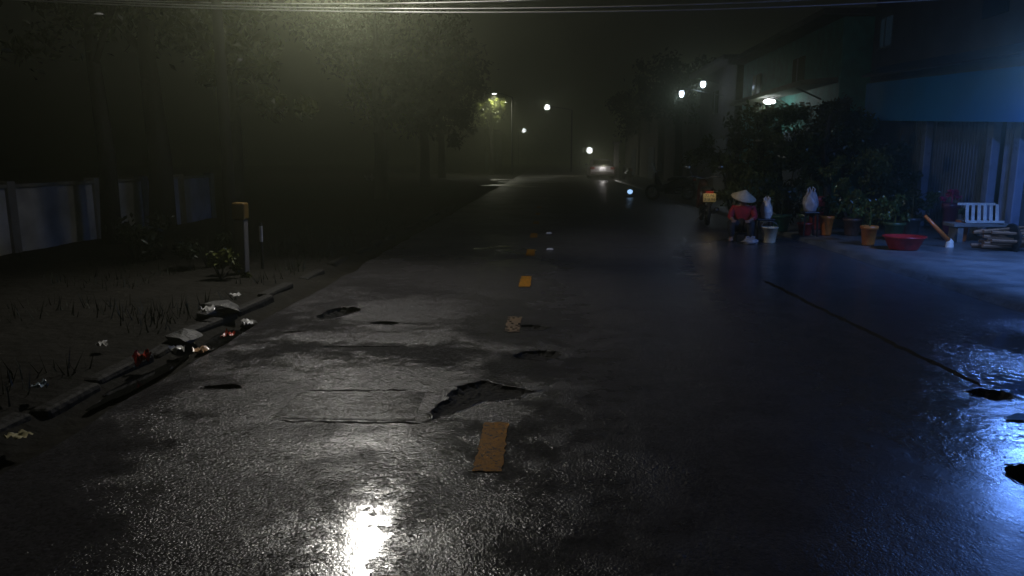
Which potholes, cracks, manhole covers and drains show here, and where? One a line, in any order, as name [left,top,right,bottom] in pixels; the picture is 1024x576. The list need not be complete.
pothole [422,379,542,423]
pothole [511,350,563,361]
pothole [313,306,363,320]
pothole [961,388,1017,401]
